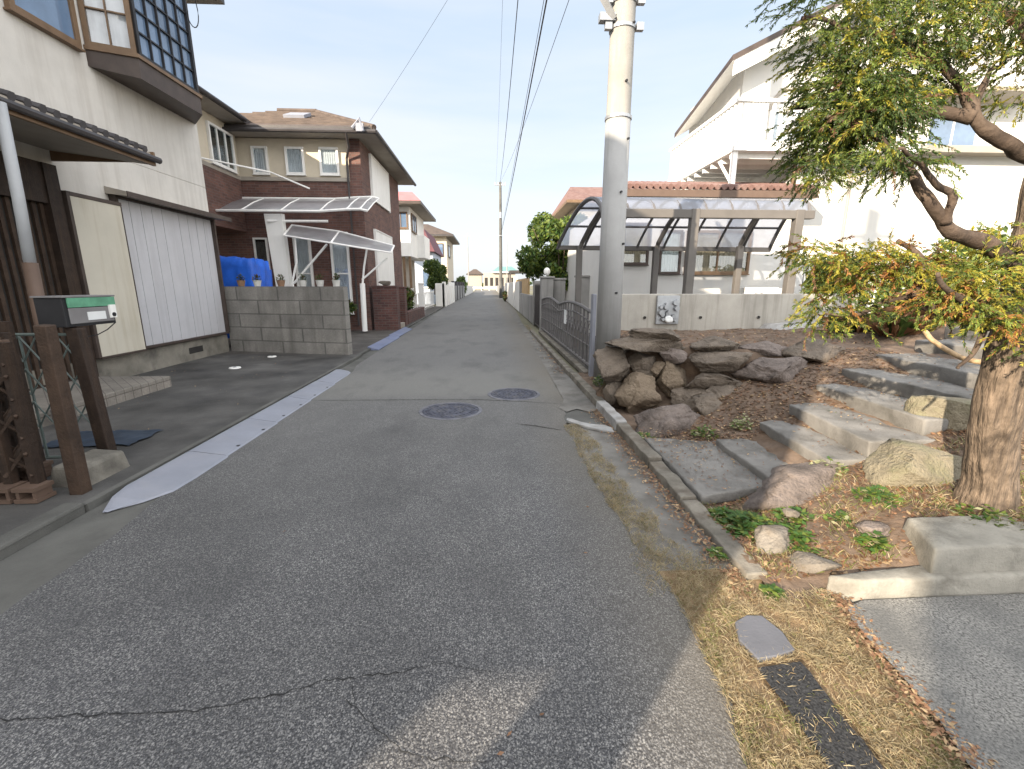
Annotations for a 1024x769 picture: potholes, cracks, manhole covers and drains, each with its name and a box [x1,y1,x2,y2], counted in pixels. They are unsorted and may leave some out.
manhole cover [419,402,482,420]
manhole cover [488,388,540,401]
crack [0,662,492,762]
